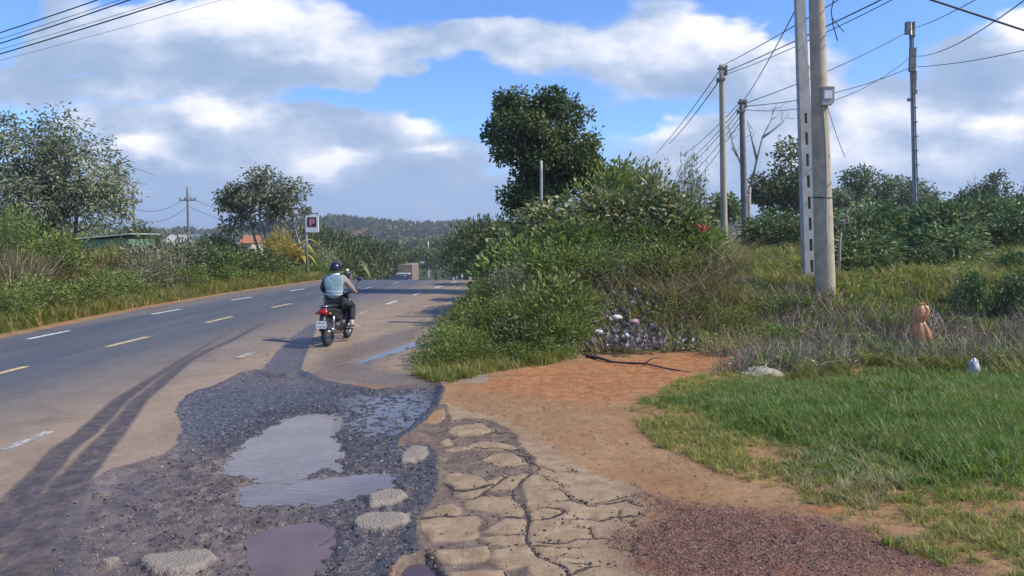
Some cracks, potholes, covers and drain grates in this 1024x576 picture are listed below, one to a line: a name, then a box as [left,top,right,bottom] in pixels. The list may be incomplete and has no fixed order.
pothole [50,369,445,576]
crack [421,422,645,576]
